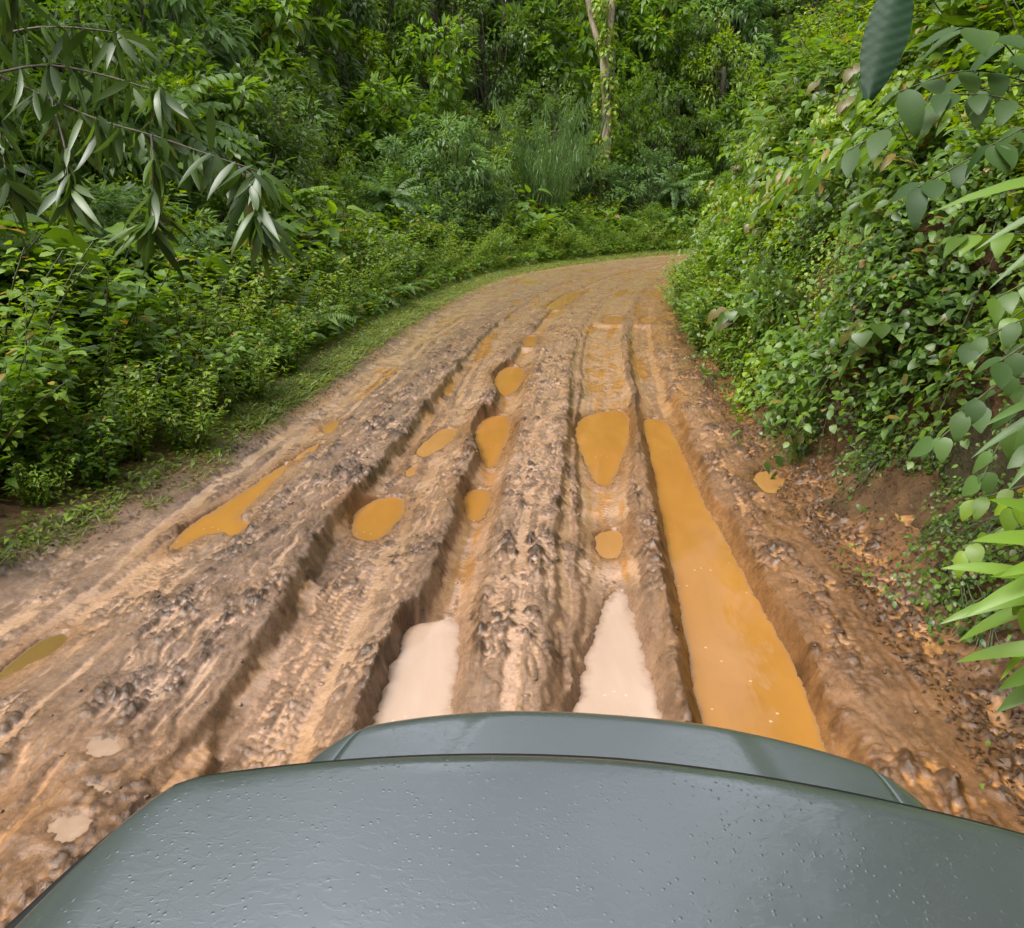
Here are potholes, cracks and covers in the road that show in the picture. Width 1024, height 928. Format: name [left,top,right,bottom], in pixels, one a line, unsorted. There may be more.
pothole [470,403,515,468]
pothole [164,461,290,552]
pothole [455,475,497,523]
pothole [345,491,410,543]
pothole [571,409,634,486]
pothole [0,629,74,682]
pothole [590,524,629,560]
pothole [491,359,527,396]
pothole [413,427,459,457]
